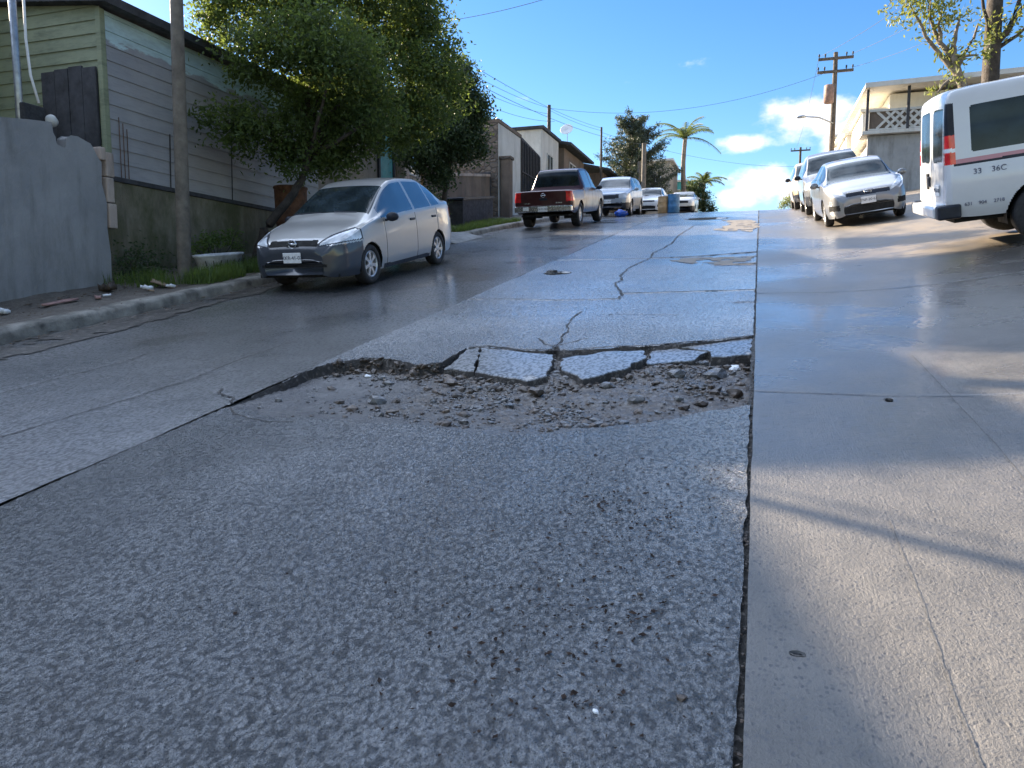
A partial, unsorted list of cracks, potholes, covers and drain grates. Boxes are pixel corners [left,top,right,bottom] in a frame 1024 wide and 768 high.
crack [468,226,757,350]
pothole [224,336,753,435]
